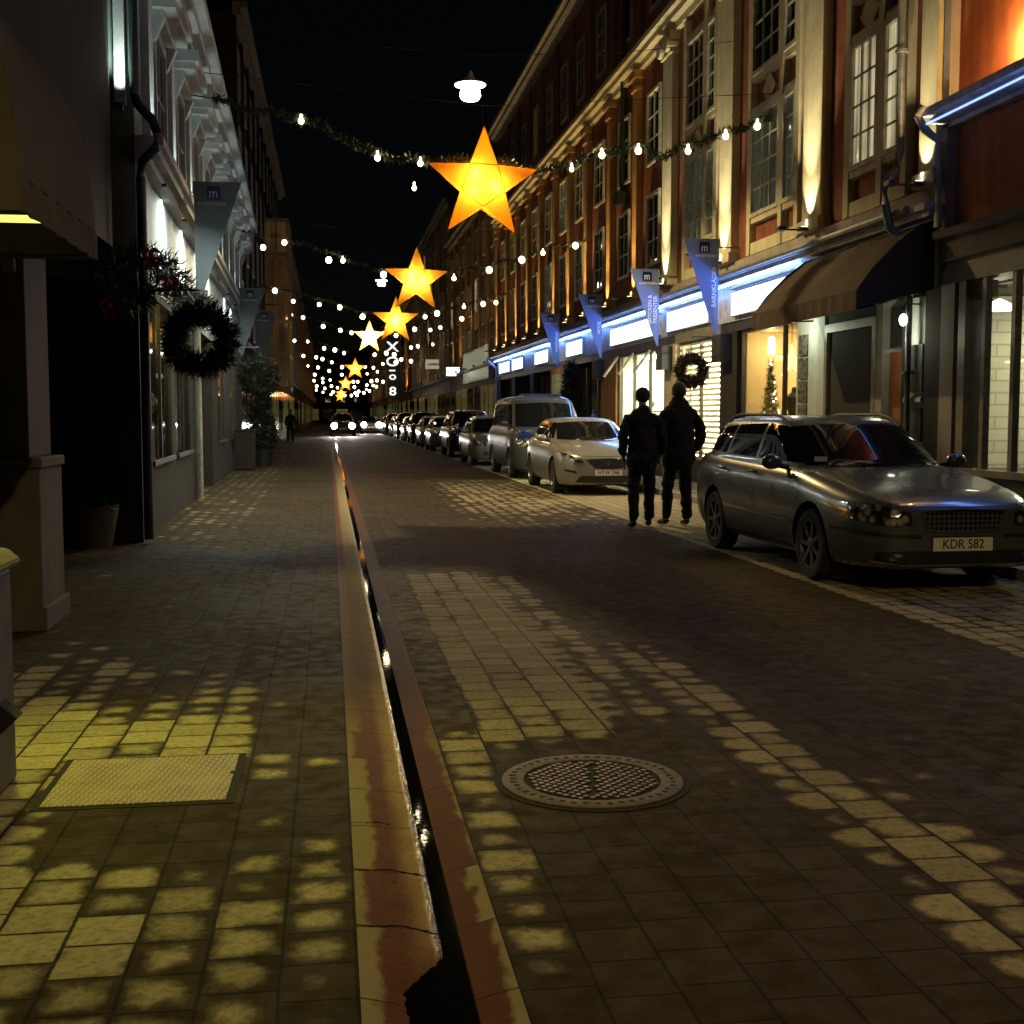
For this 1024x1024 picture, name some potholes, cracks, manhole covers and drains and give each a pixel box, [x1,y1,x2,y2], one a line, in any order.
crack [360,925,436,934]
utility cover [28,753,247,812]
manhole cover [495,754,691,812]
